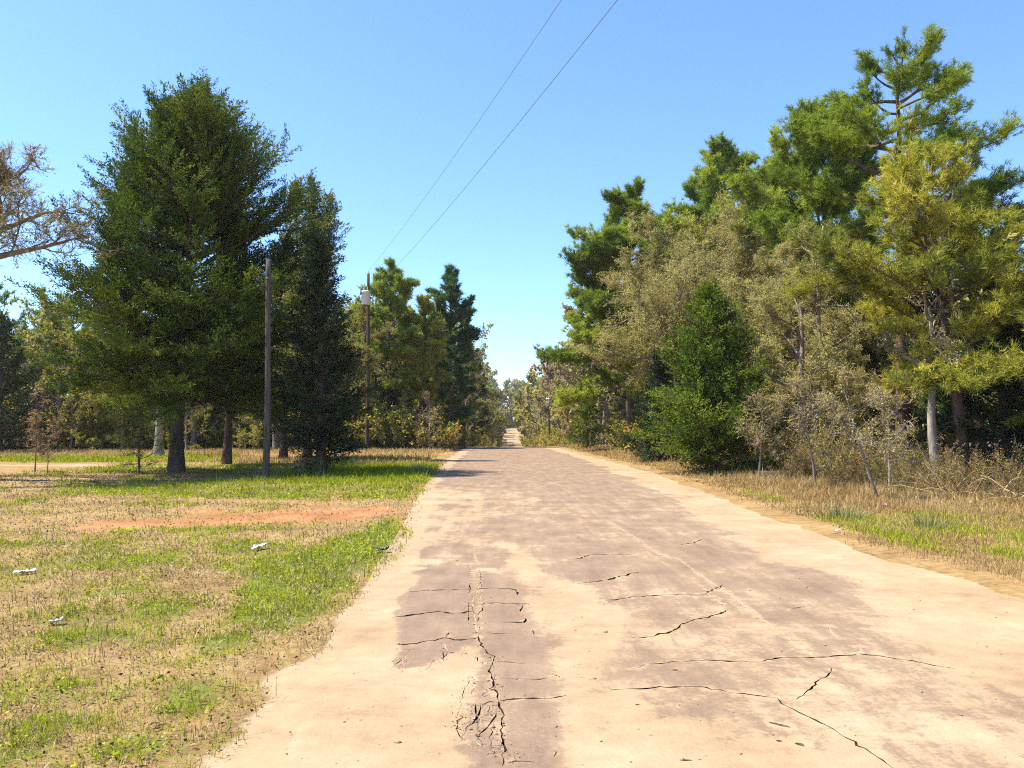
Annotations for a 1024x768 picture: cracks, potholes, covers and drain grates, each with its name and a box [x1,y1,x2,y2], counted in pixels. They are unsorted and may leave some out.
crack [568,554,639,584]
crack [605,521,954,768]
crack [390,545,563,766]
